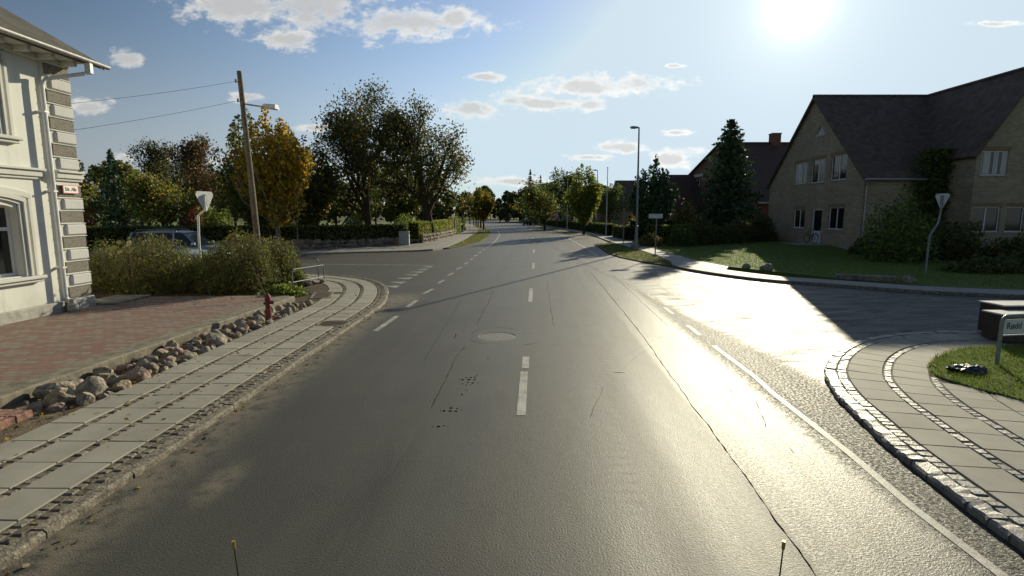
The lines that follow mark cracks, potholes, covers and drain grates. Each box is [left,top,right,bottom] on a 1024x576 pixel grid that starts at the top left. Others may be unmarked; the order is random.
manhole cover [478,332,517,341]
crack [424,290,535,408]
